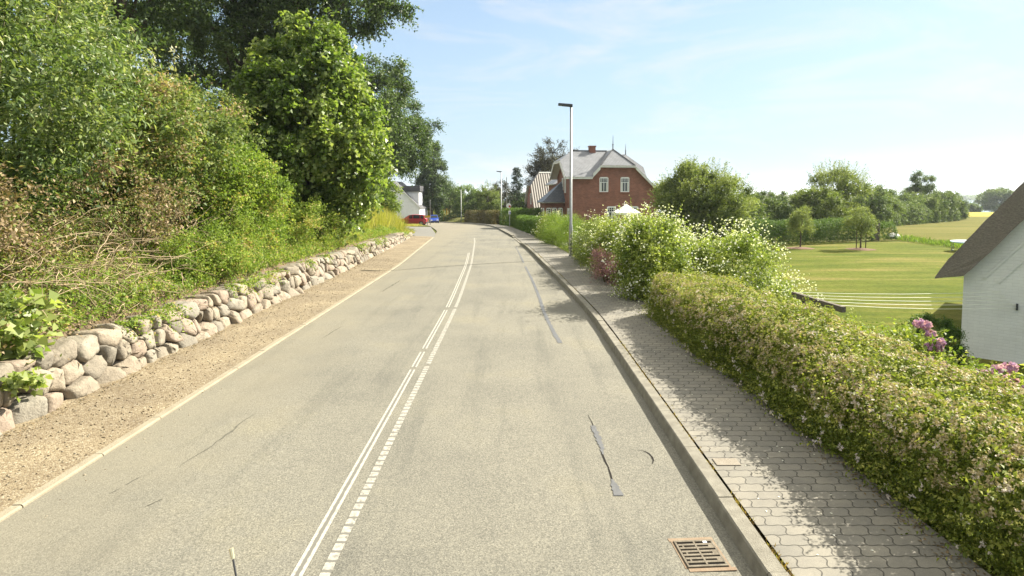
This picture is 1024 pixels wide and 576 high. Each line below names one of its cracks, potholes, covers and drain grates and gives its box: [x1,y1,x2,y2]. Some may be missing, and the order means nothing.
crack [184,416,251,463]
utility cover [712,458,741,466]
drain grate [668,537,737,572]
